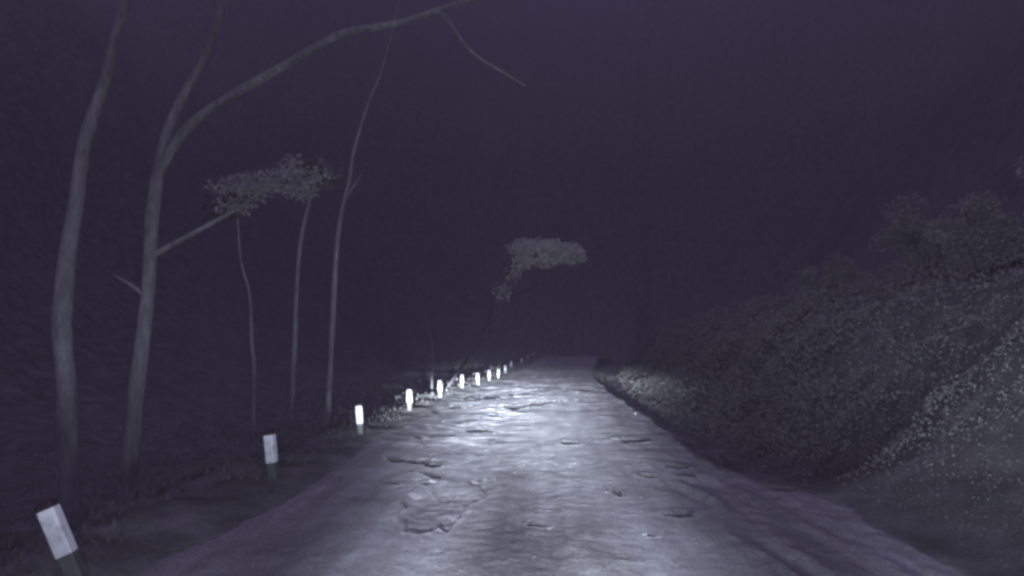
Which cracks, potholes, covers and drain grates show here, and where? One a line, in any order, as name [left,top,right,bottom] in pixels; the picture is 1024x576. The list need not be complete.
pothole [391,479,489,536]
pothole [657,462,704,471]
pothole [630,471,664,479]
pothole [603,436,658,444]
pothole [653,507,703,520]
pothole [553,438,586,446]
